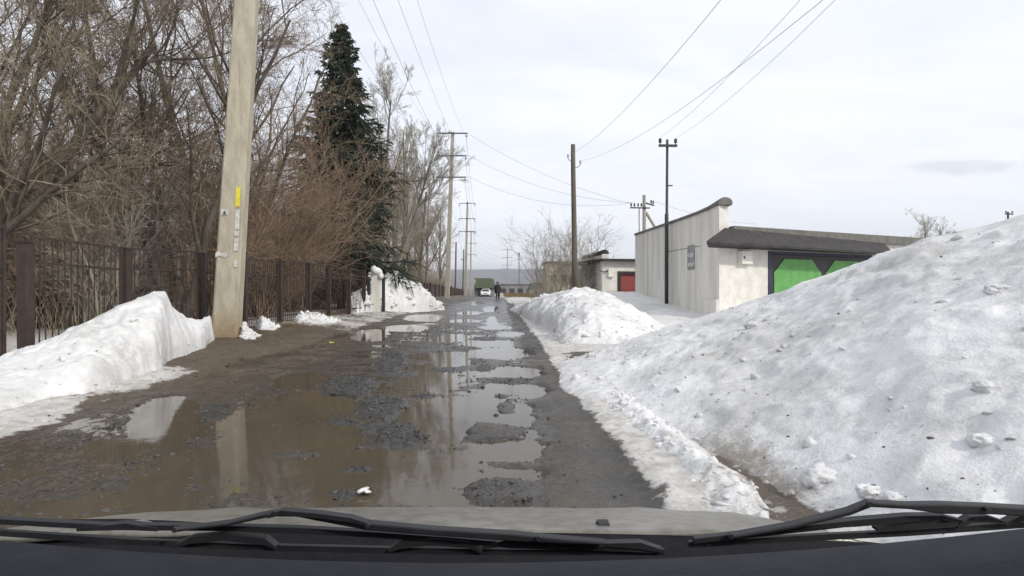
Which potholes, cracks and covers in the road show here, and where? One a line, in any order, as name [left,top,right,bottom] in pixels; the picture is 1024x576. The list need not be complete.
pothole [290,455,371,471]
pothole [512,404,537,414]
pothole [346,327,394,342]
pothole [434,334,474,342]
pothole [362,485,466,507]
pothole [493,329,532,338]
pothole [381,324,429,332]
pothole [483,382,519,393]
pothole [466,391,501,414]
pothole [269,423,366,456]
pothole [424,351,471,368]
pothole [484,315,500,326]
